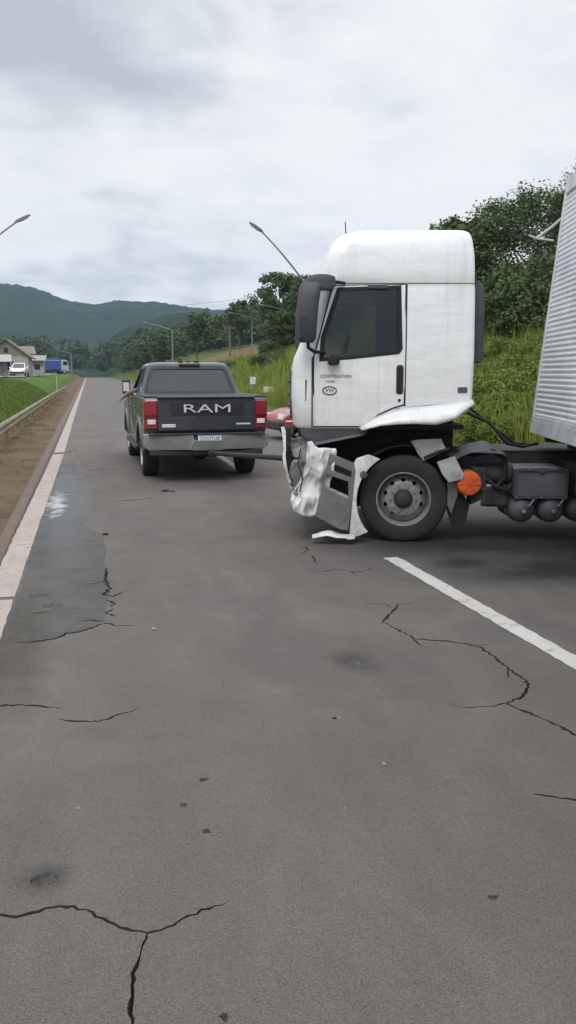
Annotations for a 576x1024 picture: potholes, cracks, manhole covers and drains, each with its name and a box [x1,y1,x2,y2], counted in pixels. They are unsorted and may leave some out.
pothole [30,872,60,886]
crack [369,603,576,736]
crack [300,547,374,576]
crack [0,902,227,1024]
crack [0,704,139,722]
pothole [342,658,365,669]
crack [17,568,131,643]
